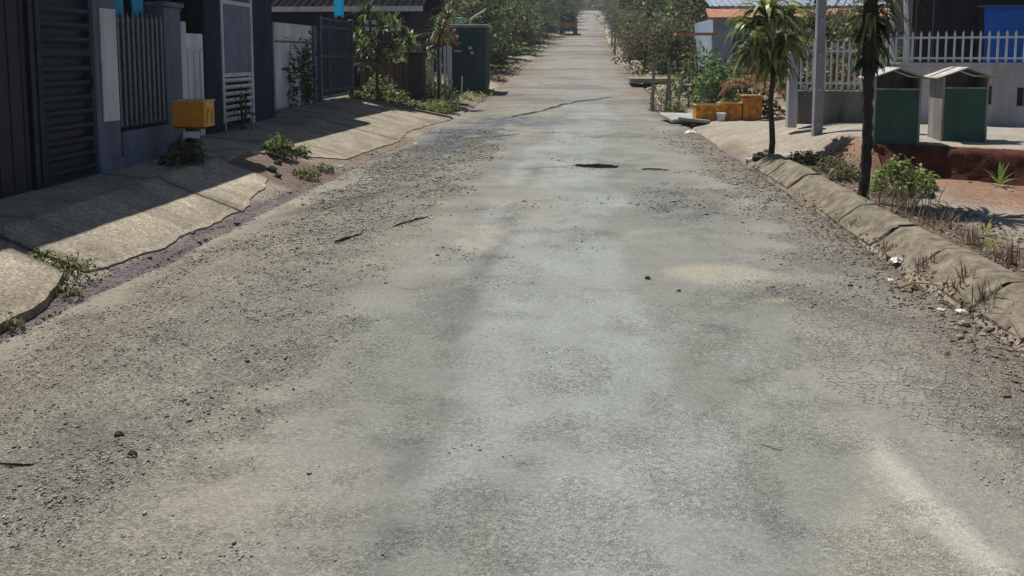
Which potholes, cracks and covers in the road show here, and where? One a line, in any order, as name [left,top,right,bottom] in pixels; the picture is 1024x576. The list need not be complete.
crack [512,97,610,117]
